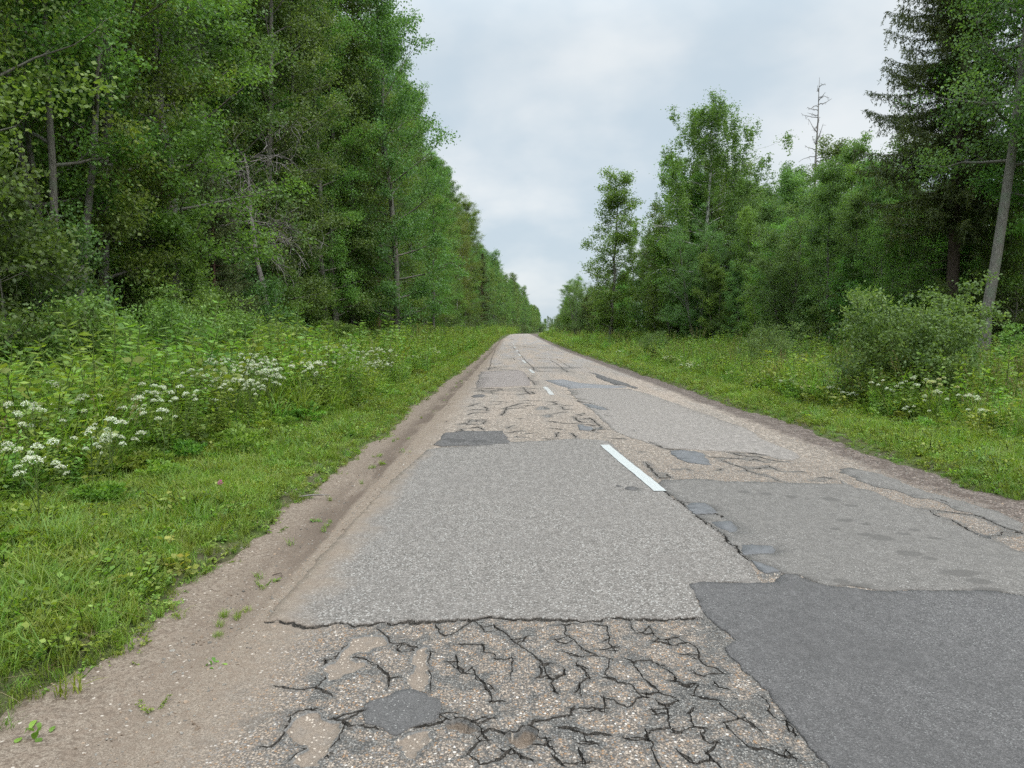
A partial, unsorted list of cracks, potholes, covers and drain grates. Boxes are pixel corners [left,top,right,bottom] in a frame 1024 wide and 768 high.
pothole [506,726,538,749]
crack [930,500,1023,536]
crack [446,339,832,482]
crack [258,616,799,768]
